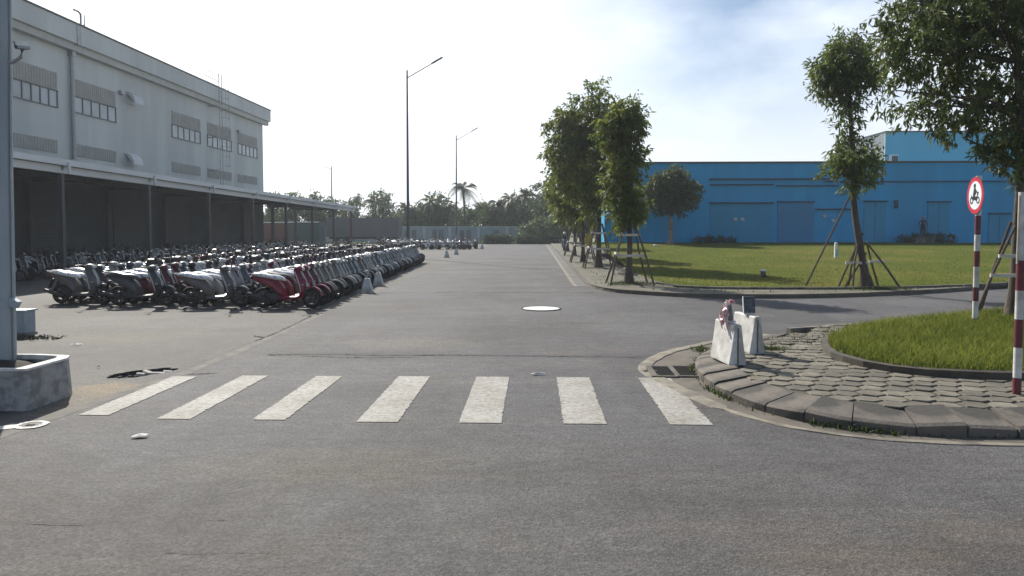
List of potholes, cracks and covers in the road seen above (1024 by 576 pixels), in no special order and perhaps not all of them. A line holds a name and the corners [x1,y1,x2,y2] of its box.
drain grate [643,365,698,378]
pothole [106,367,178,379]
manhole cover [0,420,50,429]
